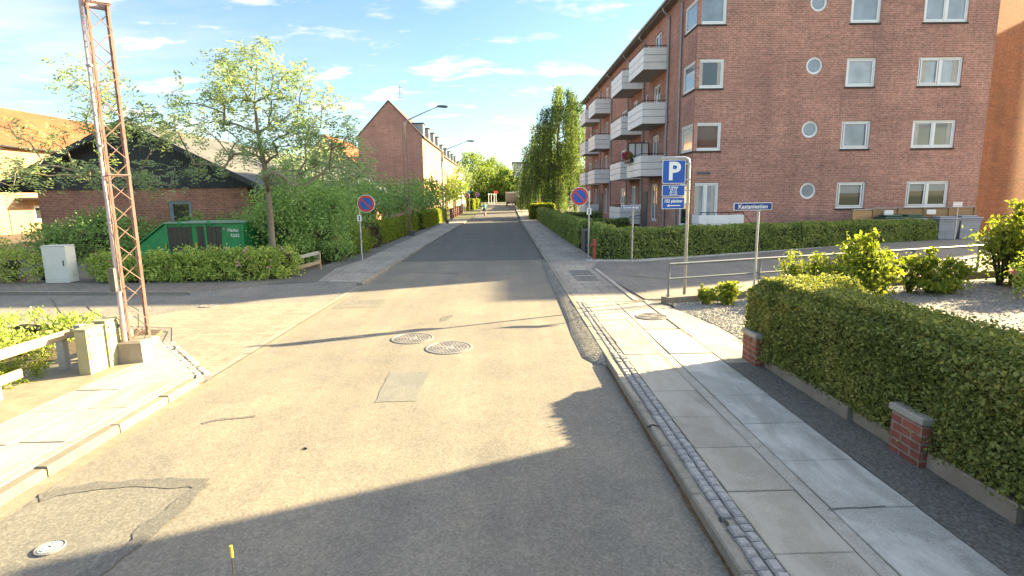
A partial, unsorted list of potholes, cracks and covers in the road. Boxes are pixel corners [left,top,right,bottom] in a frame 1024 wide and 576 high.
manhole cover [391,333,434,344]
manhole cover [425,341,473,354]
manhole cover [33,539,67,557]
